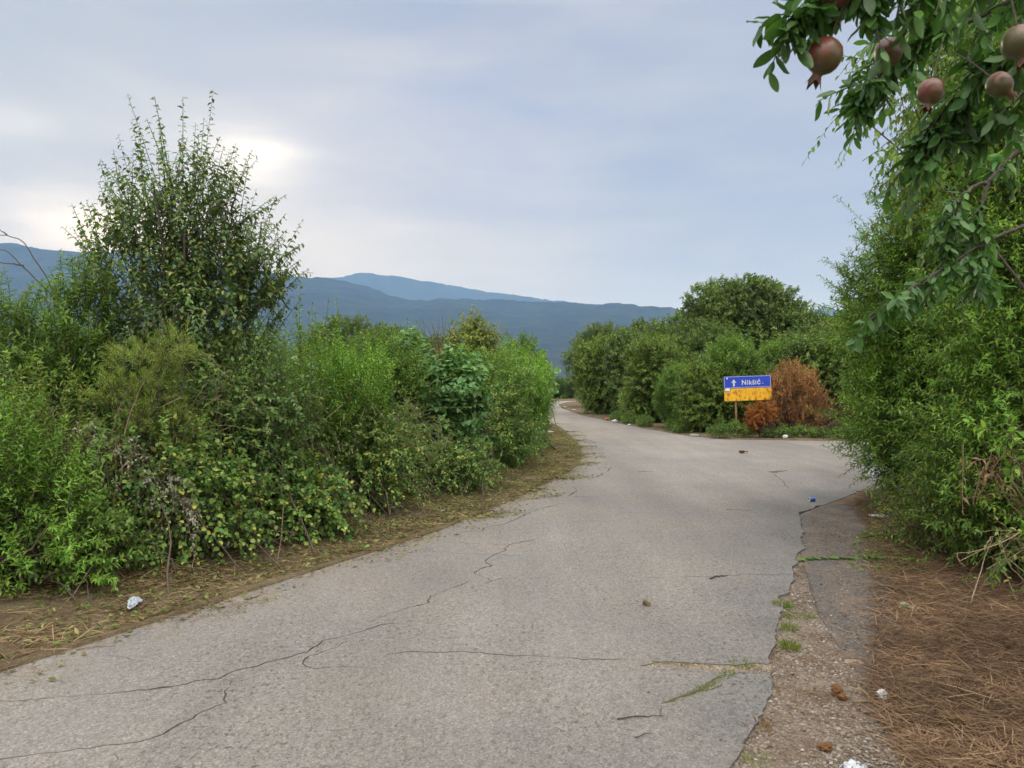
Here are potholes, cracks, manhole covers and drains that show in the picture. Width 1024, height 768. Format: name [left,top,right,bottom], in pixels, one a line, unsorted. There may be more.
crack [659,674,727,714]
crack [0,581,469,767]
crack [384,651,636,661]
